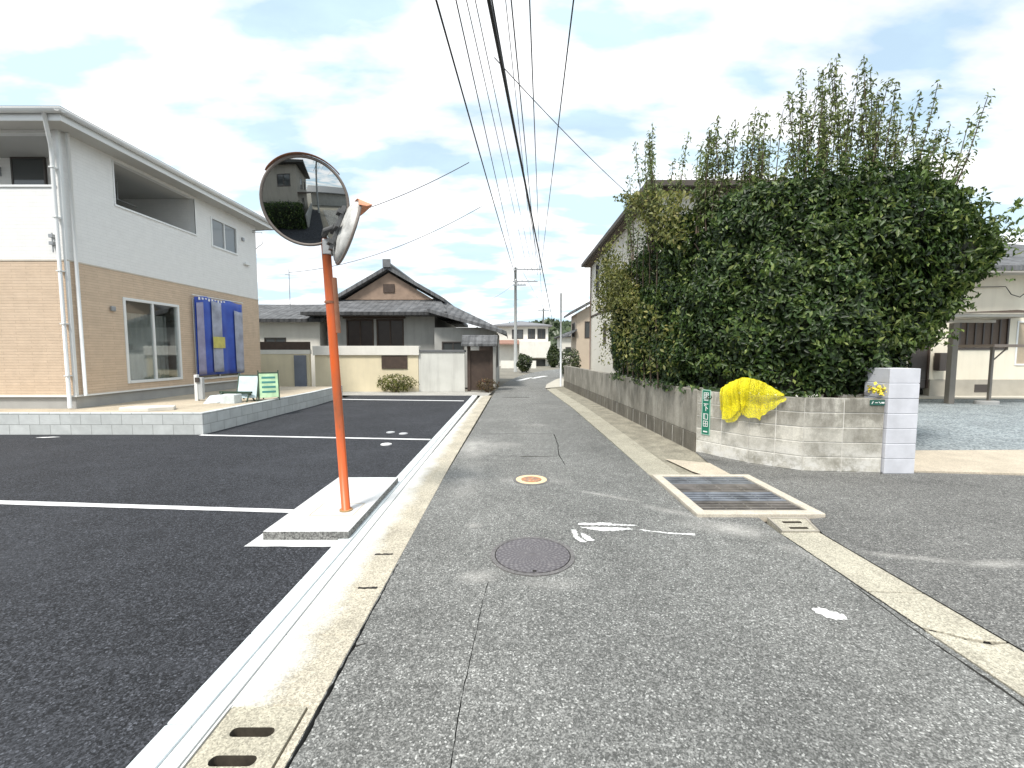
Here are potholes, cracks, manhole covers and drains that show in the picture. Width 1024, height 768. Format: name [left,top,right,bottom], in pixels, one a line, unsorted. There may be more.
drain grate [652,474,826,522]
manhole cover [513,474,550,485]
drain grate [180,705,319,768]
crack [480,434,565,465]
crack [450,582,489,768]
manhole cover [491,537,575,576]
